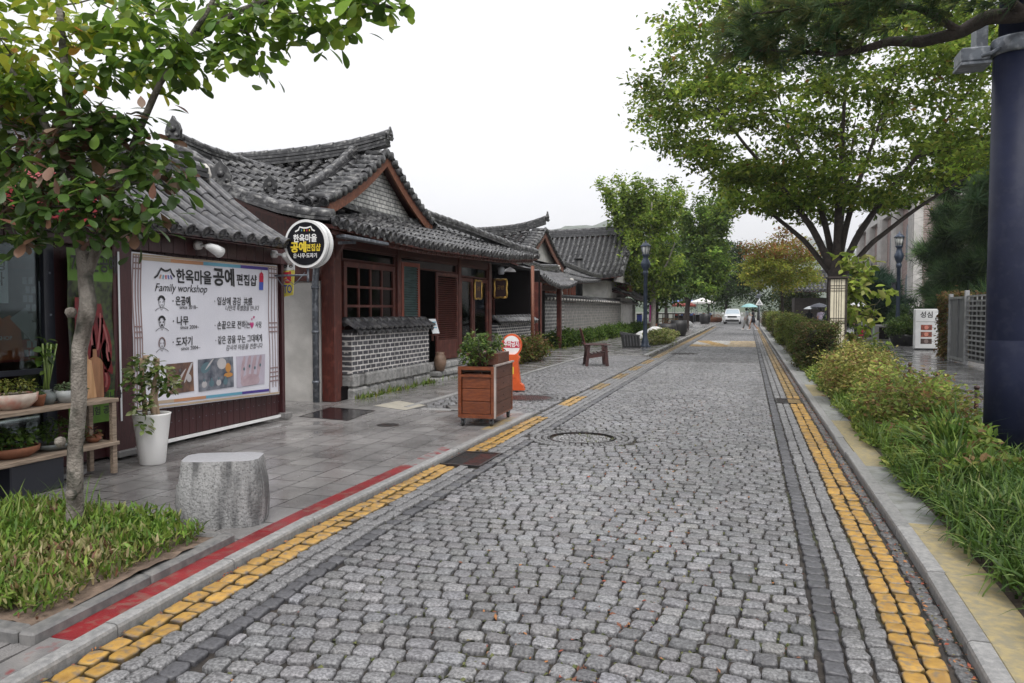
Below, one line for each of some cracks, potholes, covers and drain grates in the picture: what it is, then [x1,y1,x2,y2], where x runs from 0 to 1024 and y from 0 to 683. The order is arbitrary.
manhole cover [529,429,634,449]
manhole cover [513,394,563,403]
drain grate [440,451,503,468]
